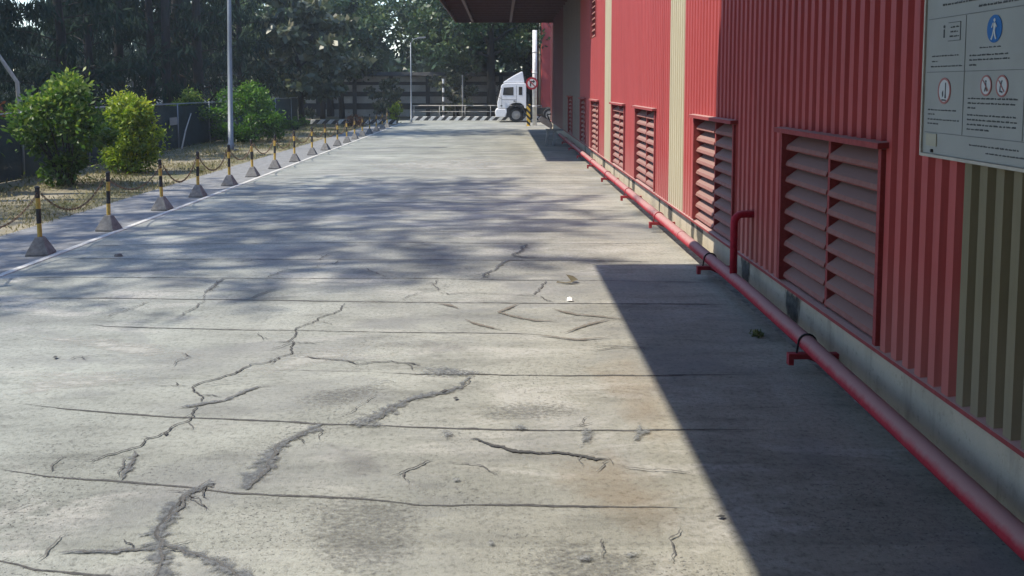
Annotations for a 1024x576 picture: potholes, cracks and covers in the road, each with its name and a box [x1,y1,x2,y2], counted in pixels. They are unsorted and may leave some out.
crack [449,416,692,474]
crack [39,304,471,576]
crack [669,528,681,559]
crack [402,243,553,302]
